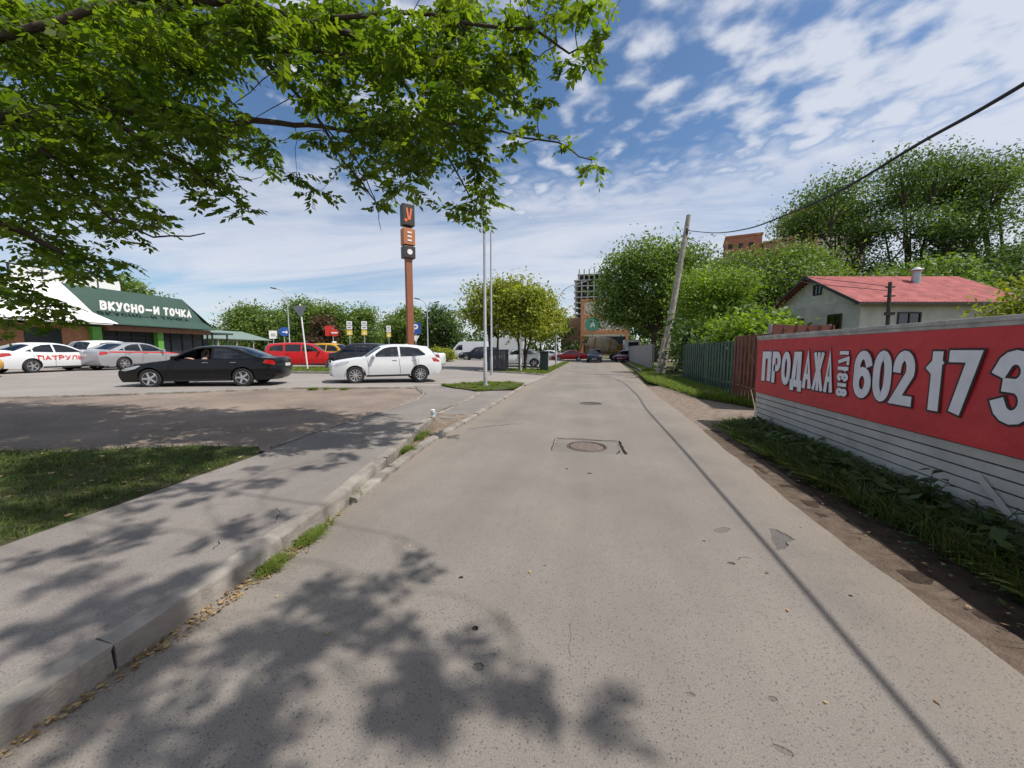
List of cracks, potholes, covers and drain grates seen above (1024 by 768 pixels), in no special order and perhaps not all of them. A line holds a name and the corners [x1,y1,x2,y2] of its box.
manhole cover [567,441,607,452]
